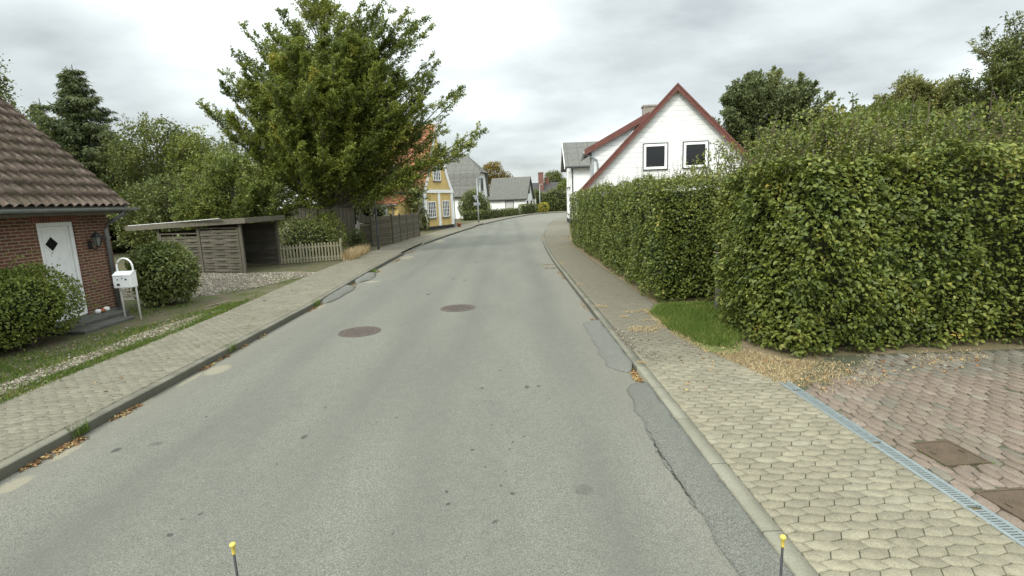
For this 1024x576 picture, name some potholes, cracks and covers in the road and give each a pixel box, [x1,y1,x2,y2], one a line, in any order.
manhole cover [973,487,1024,522]
manhole cover [440,304,475,312]
manhole cover [909,440,992,468]
manhole cover [338,326,381,337]
crack [646,429,697,508]
